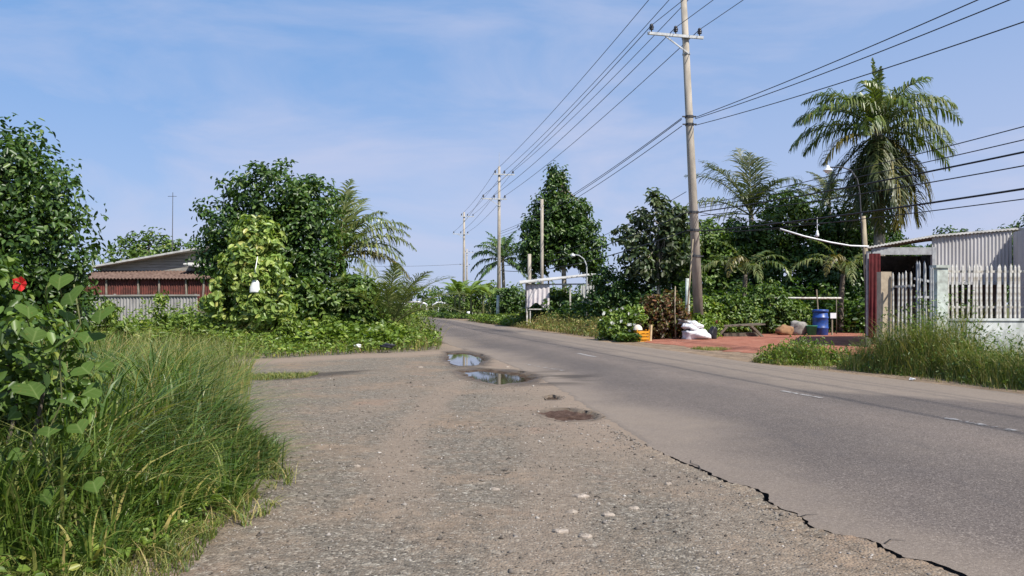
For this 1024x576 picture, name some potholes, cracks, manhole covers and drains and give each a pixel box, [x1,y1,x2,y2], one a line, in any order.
pothole [451,367,543,386]
pothole [440,350,493,367]
crack [635,446,967,576]
pothole [532,407,604,422]
